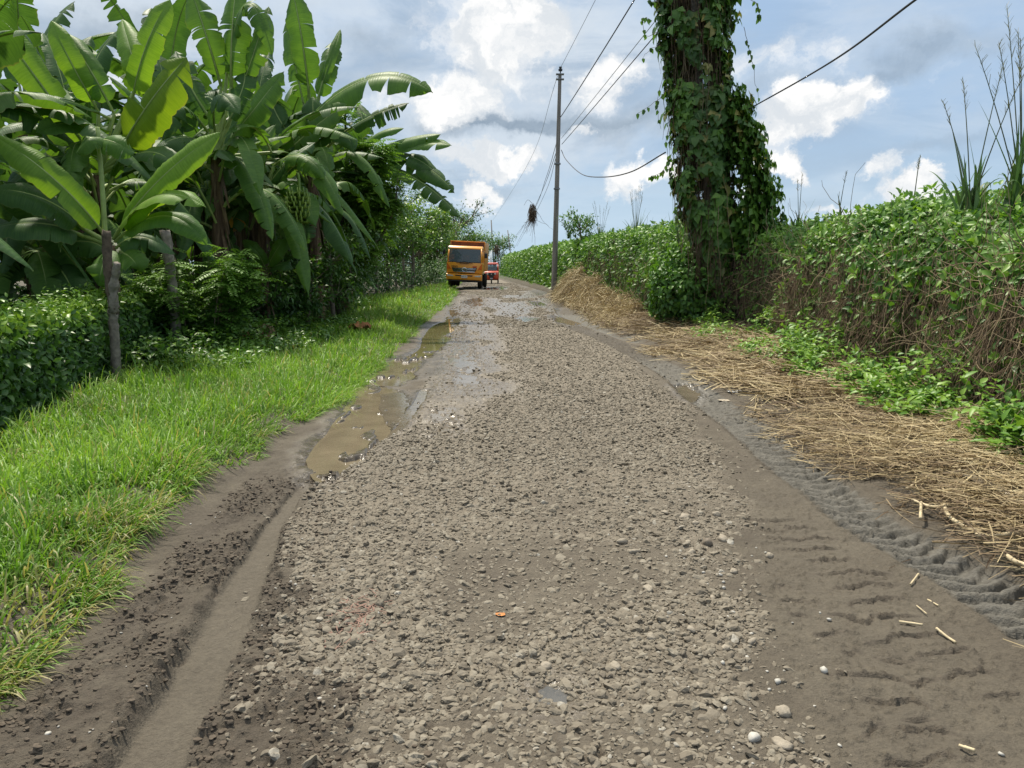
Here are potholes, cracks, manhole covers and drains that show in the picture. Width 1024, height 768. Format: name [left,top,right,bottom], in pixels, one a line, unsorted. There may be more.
pothole [406,321,456,359]
pothole [386,390,429,438]
pothole [379,392,411,427]
pothole [302,385,401,483]
pothole [362,350,436,386]
pothole [527,678,571,705]
